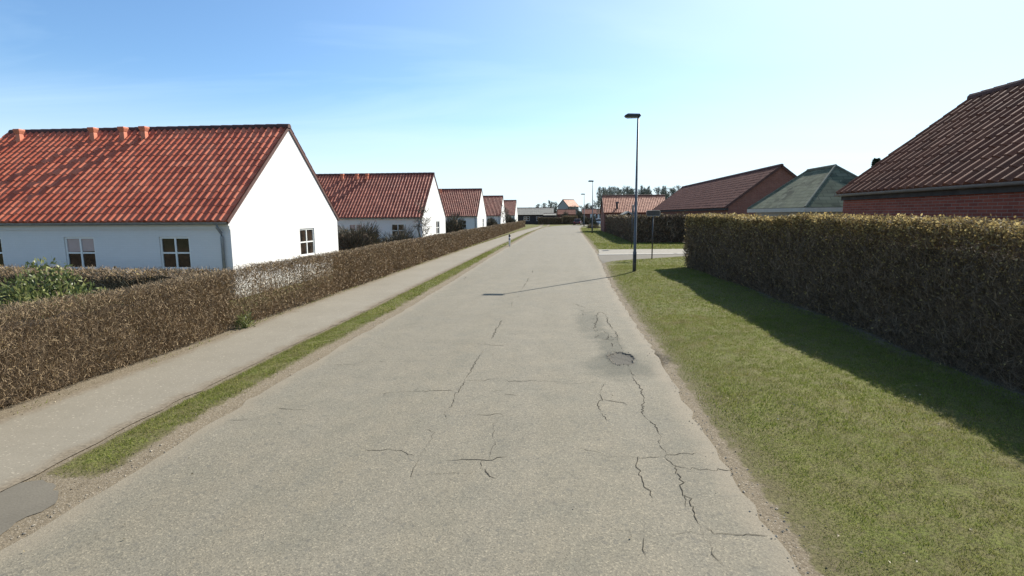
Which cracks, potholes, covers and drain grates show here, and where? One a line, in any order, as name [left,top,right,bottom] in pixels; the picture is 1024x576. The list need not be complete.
pothole [605,350,638,366]
crack [585,366,765,560]
crack [401,272,626,475]
